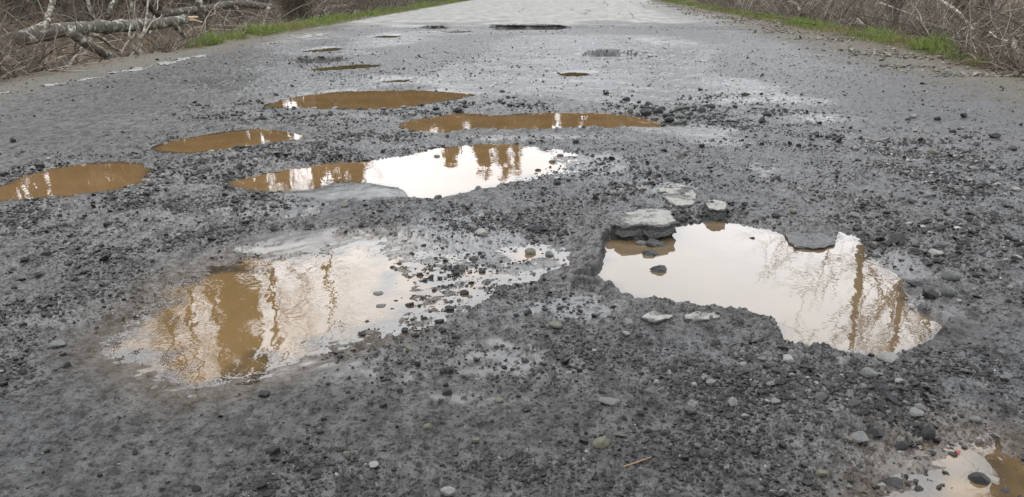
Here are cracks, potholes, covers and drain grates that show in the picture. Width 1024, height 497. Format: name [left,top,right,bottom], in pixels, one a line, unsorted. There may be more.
pothole [216,142,586,199]
pothole [144,128,312,154]
pothole [863,428,1024,497]
